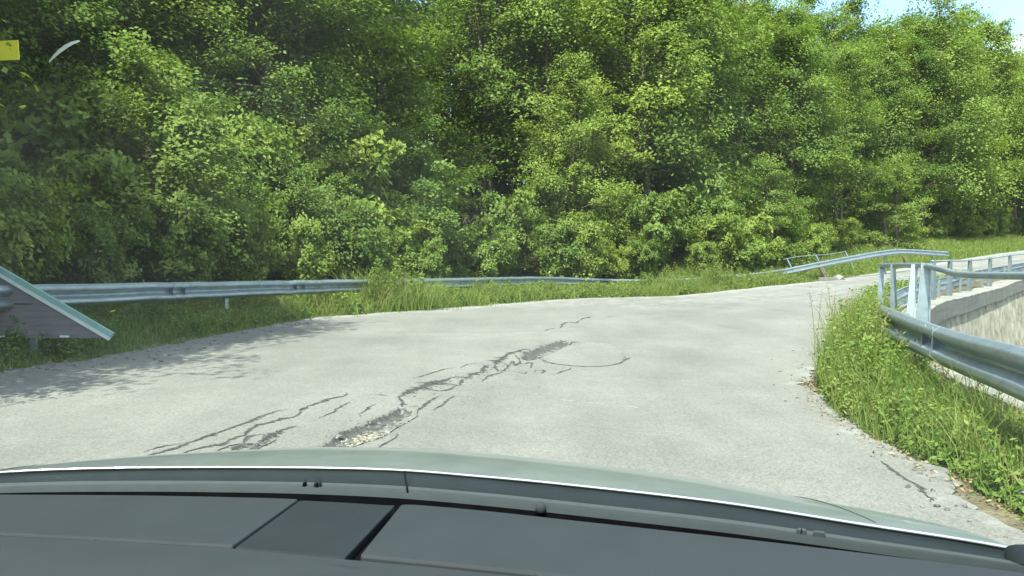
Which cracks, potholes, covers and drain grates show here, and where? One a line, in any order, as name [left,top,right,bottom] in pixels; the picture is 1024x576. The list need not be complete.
crack [147,317,630,455]
crack [881,461,934,501]
pothole [319,406,418,447]
